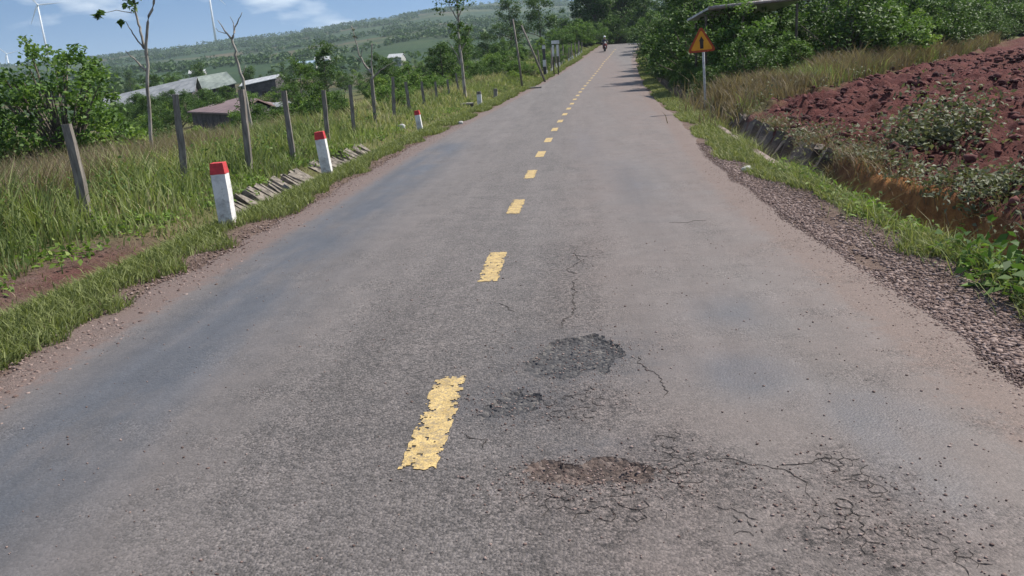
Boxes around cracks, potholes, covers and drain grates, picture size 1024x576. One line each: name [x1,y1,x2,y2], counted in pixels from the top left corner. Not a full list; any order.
pothole [524,456,665,486]
pothole [521,333,626,381]
crack [561,249,587,328]
crack [906,528,989,574]
pothole [476,389,547,421]
crack [650,431,900,553]
crack [519,492,667,524]
